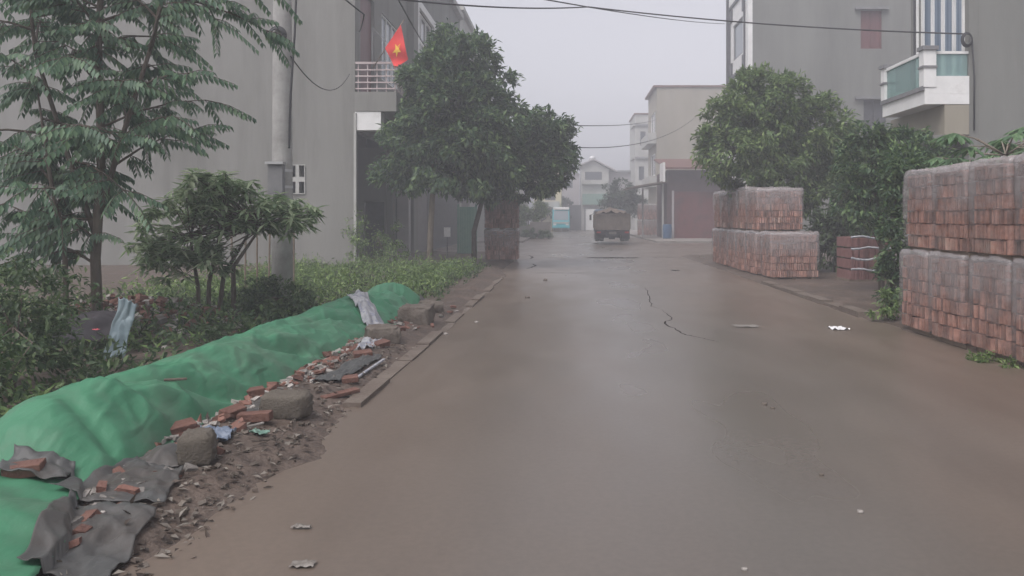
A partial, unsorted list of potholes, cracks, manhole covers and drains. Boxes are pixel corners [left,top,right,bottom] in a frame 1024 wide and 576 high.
crack [647,290,718,342]
